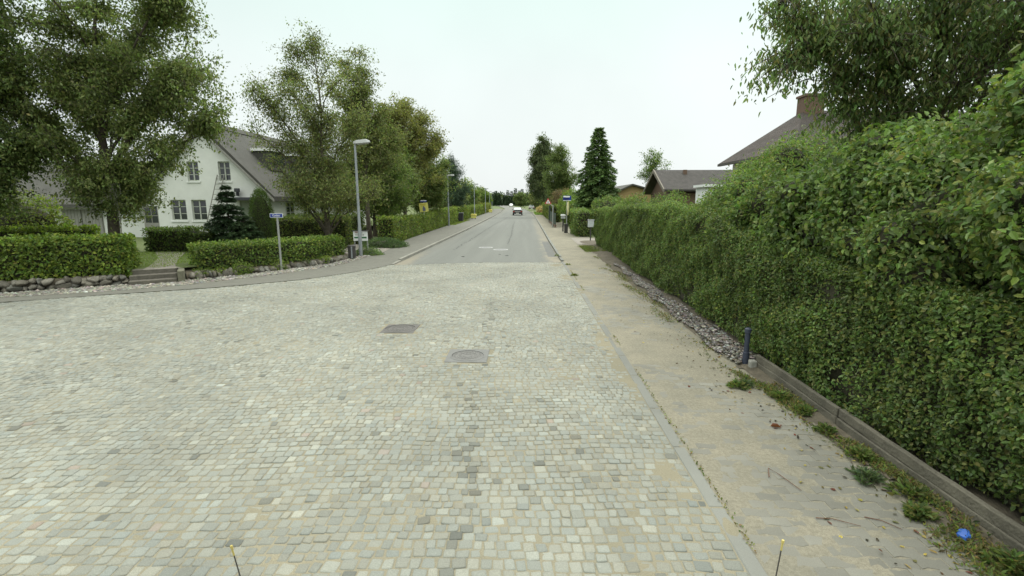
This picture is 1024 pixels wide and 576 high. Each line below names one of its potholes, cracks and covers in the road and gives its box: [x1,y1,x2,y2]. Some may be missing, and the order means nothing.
manhole cover [380,324,420,333]
manhole cover [444,349,490,363]
